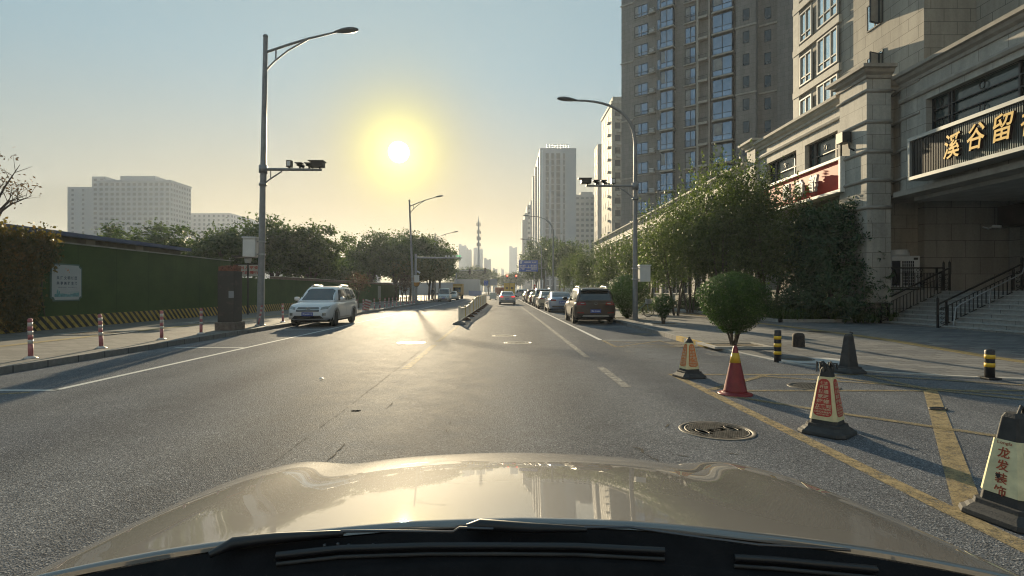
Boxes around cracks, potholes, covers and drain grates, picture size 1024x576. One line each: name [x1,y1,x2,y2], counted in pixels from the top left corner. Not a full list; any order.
manhole cover [787,382,842,390]
manhole cover [679,421,757,441]
